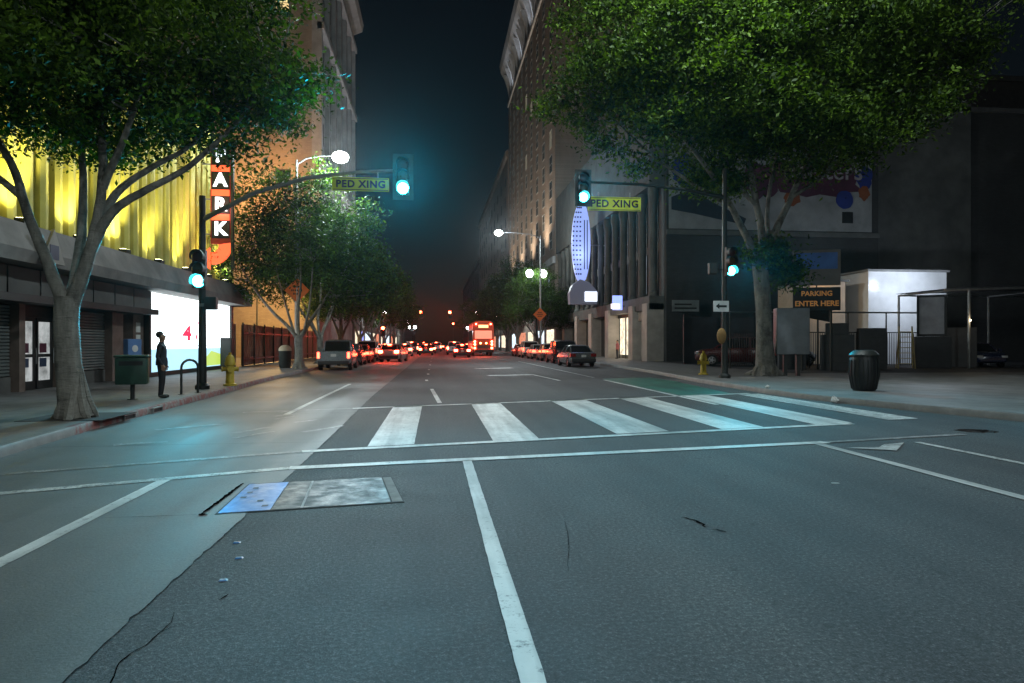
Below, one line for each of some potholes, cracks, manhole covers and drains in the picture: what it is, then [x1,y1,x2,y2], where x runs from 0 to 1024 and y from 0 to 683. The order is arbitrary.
crack [110,594,228,683]
